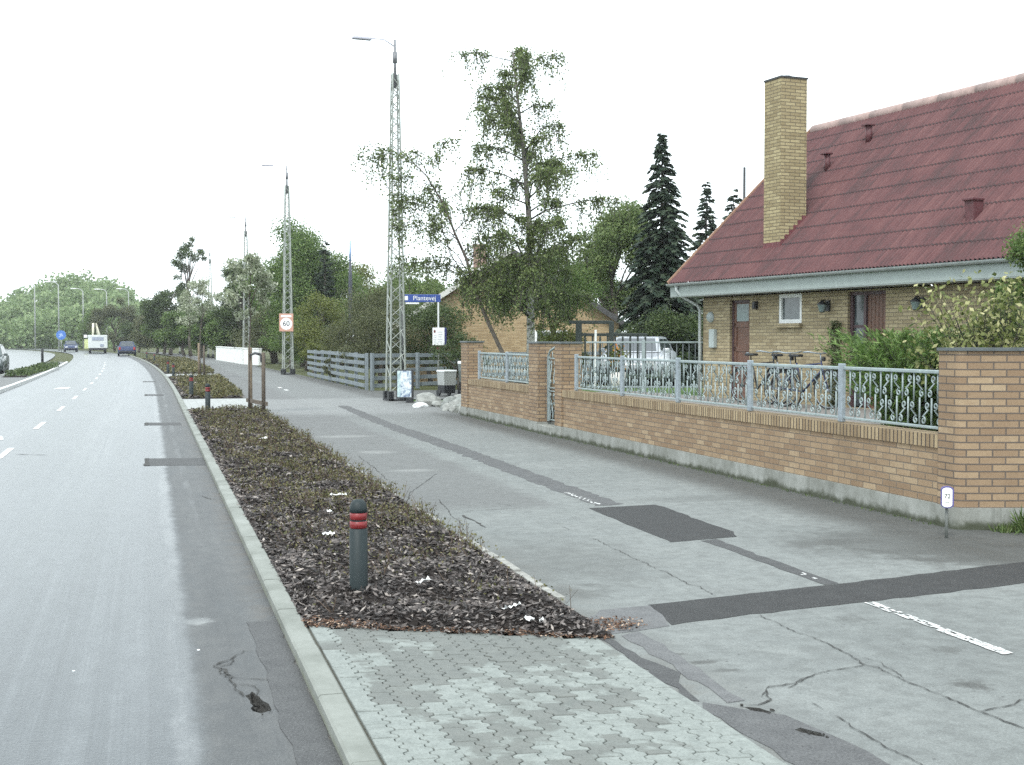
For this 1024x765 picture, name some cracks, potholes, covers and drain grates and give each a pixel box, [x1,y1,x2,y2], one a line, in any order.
crack [213,650,263,696]
crack [408,474,515,527]
crack [750,616,1024,728]
pothole [246,692,271,715]
